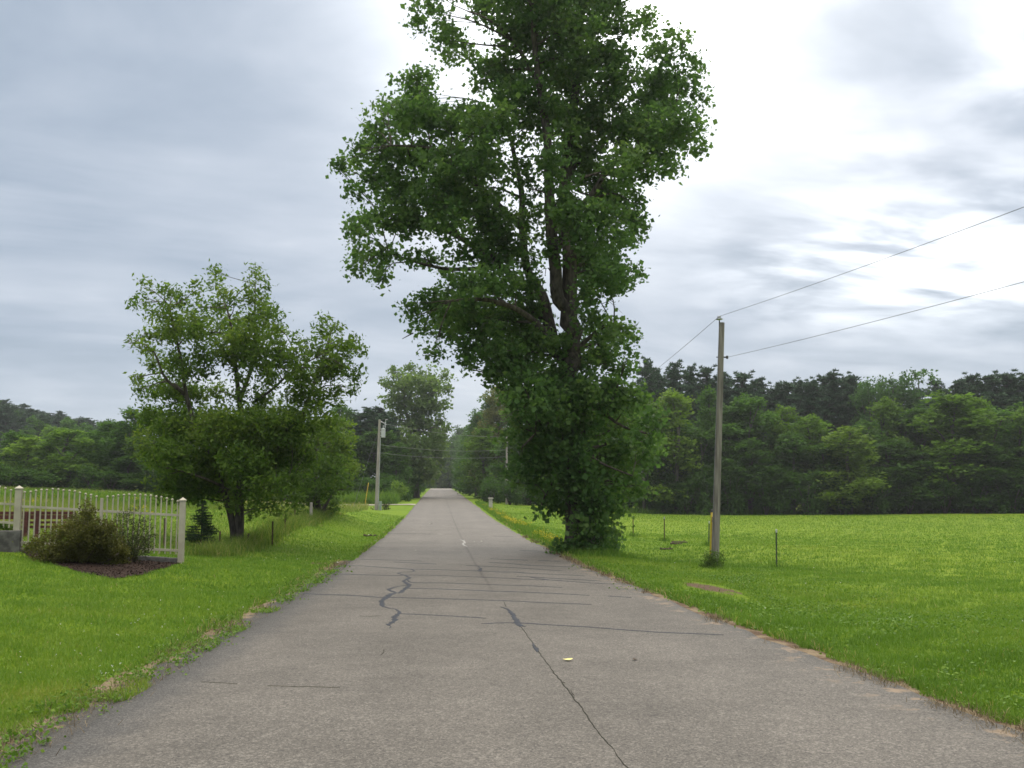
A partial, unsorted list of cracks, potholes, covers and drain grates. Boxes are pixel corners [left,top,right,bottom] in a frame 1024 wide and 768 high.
crack [303,536,722,768]
